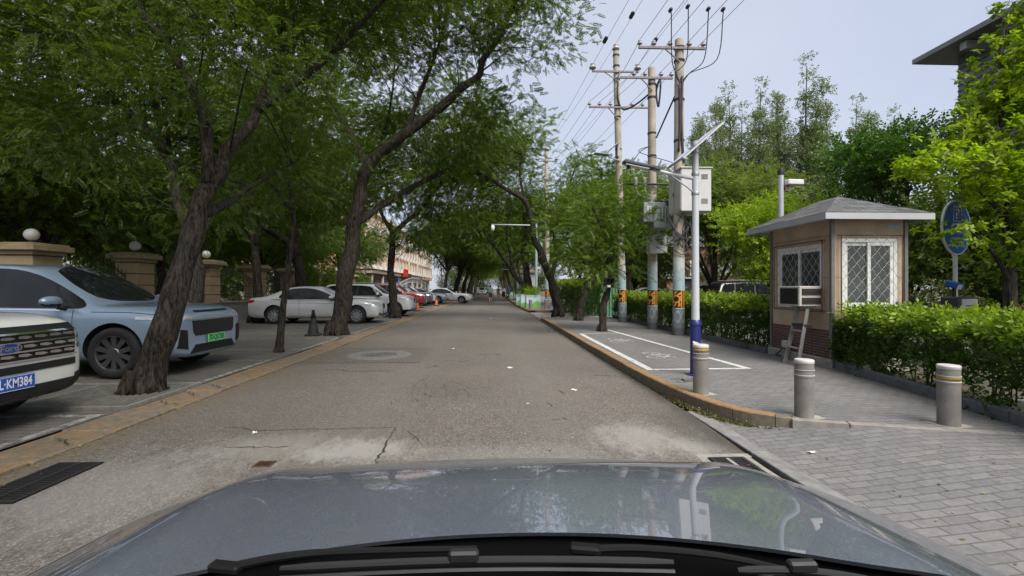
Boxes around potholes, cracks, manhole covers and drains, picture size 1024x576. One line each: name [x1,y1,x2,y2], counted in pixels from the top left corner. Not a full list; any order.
drain grate [0,462,103,504]
crack [227,430,288,448]
manhole cover [347,351,412,360]
drain grate [694,453,781,478]
